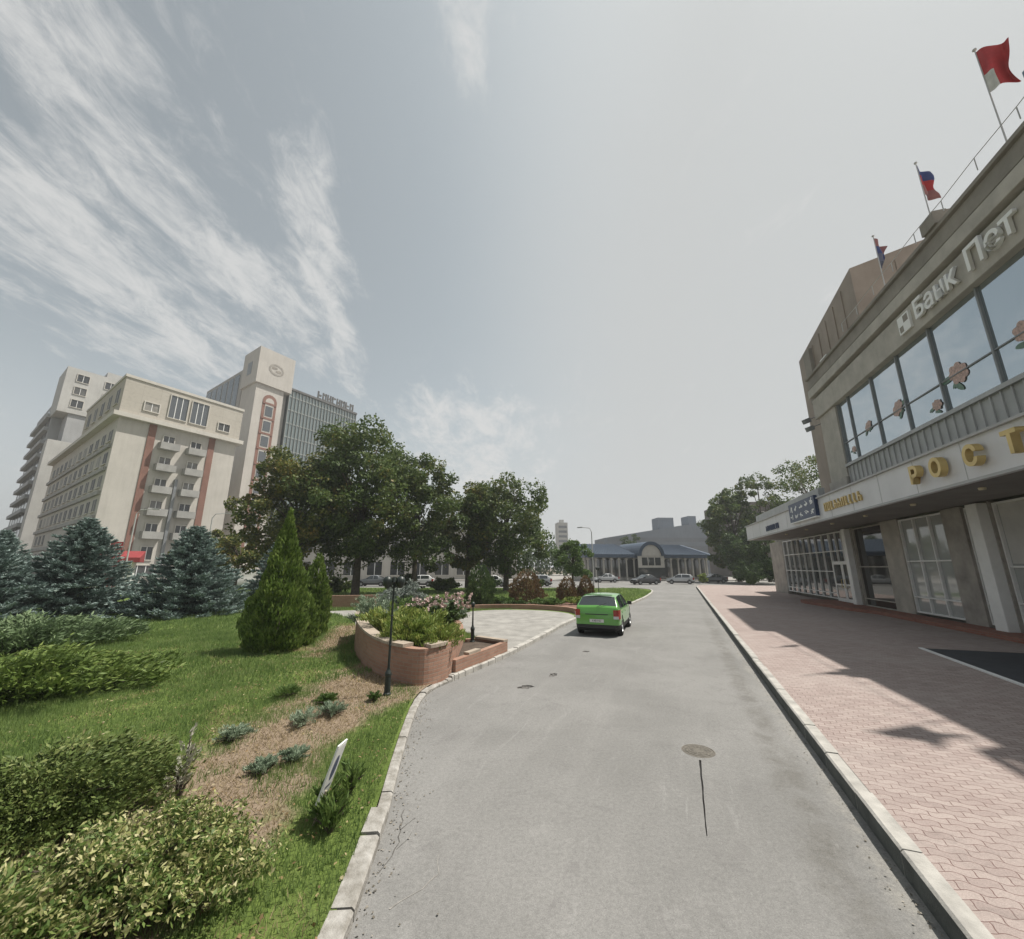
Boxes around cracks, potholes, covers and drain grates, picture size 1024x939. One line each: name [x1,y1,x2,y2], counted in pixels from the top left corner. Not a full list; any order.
crack [378,809,412,873]
crack [389,859,440,909]
manhole cover [681,744,716,761]
crack [699,761,707,836]
